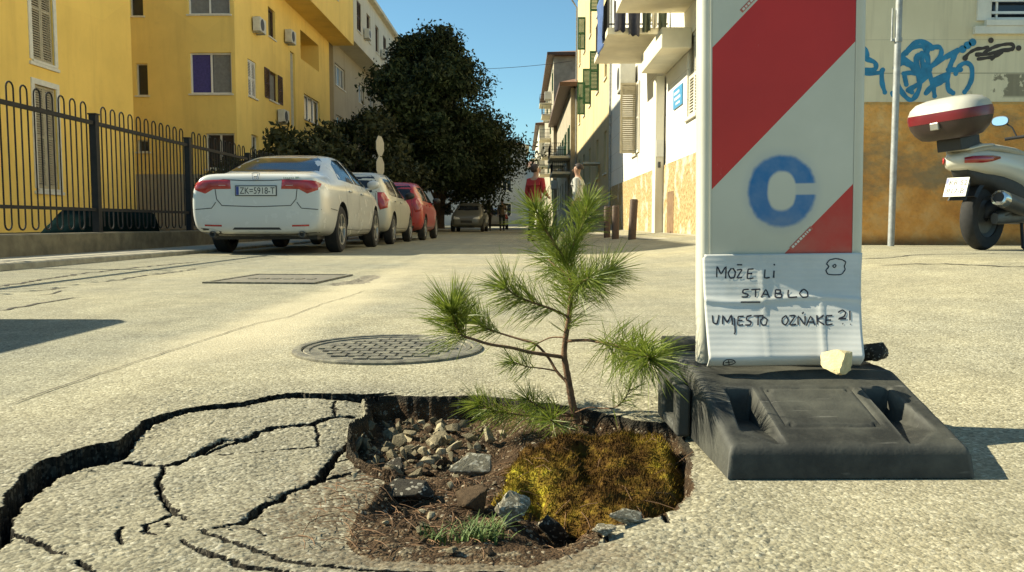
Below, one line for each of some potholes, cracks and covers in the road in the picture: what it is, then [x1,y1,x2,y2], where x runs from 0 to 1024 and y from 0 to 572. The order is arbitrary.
pothole [345,395,696,568]
crack [0,291,670,572]
manhole cover [202,274,353,284]
manhole cover [291,334,482,365]
